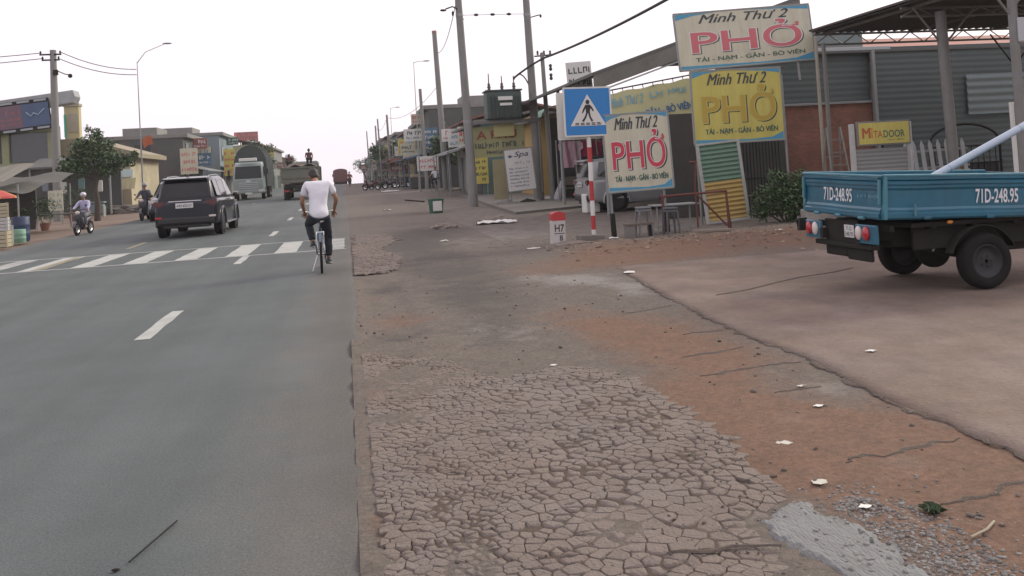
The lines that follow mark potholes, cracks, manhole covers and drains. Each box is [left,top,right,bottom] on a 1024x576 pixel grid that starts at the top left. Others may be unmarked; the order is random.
crack [624,268,1024,463]
crack [940,480,1024,505]
crack [392,362,782,576]
